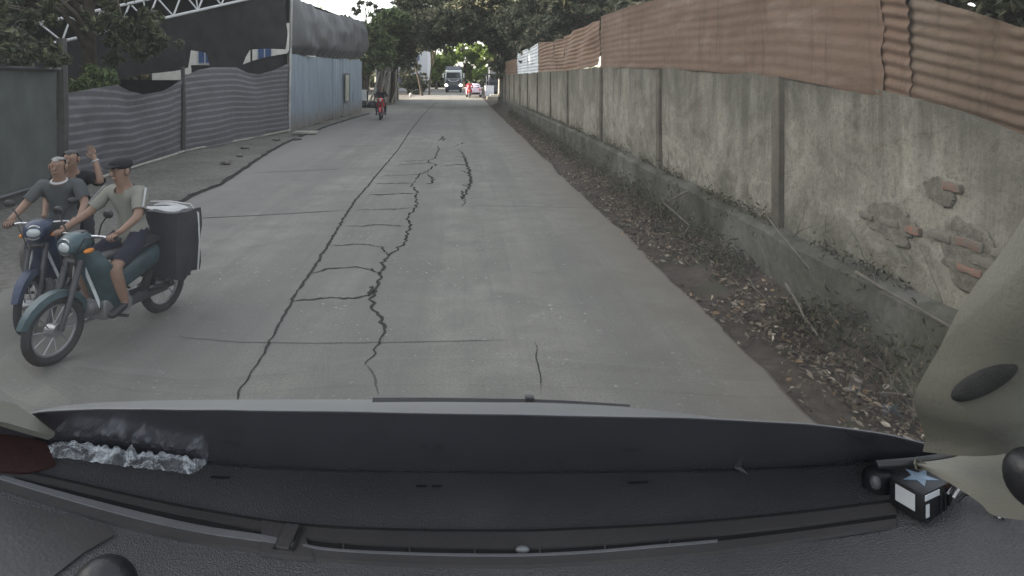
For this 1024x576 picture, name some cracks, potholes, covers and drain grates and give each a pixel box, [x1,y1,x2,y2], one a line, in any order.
crack [295,136,473,394]
